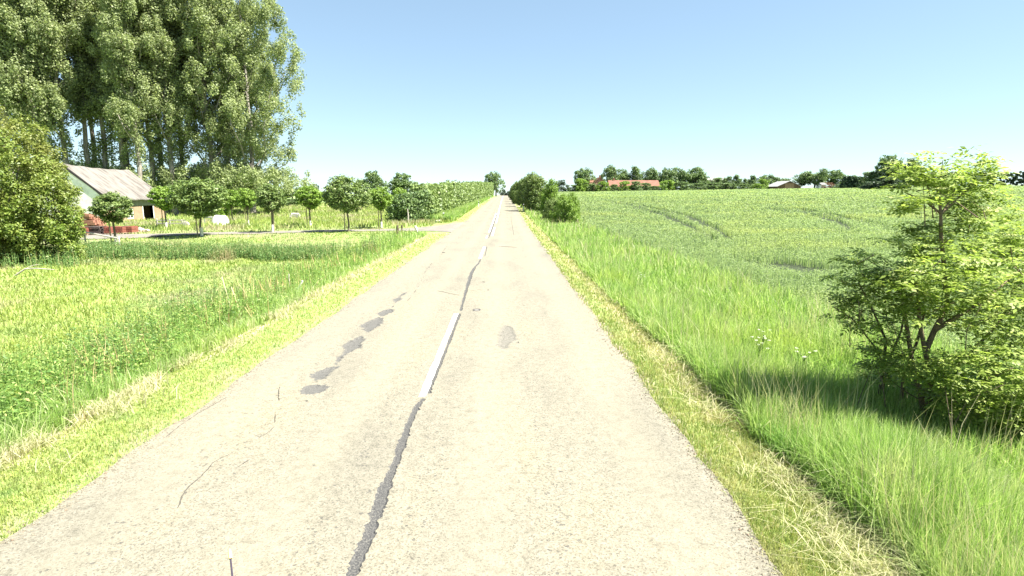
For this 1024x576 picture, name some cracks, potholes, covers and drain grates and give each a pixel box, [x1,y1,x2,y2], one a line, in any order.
crack [177,453,248,508]
